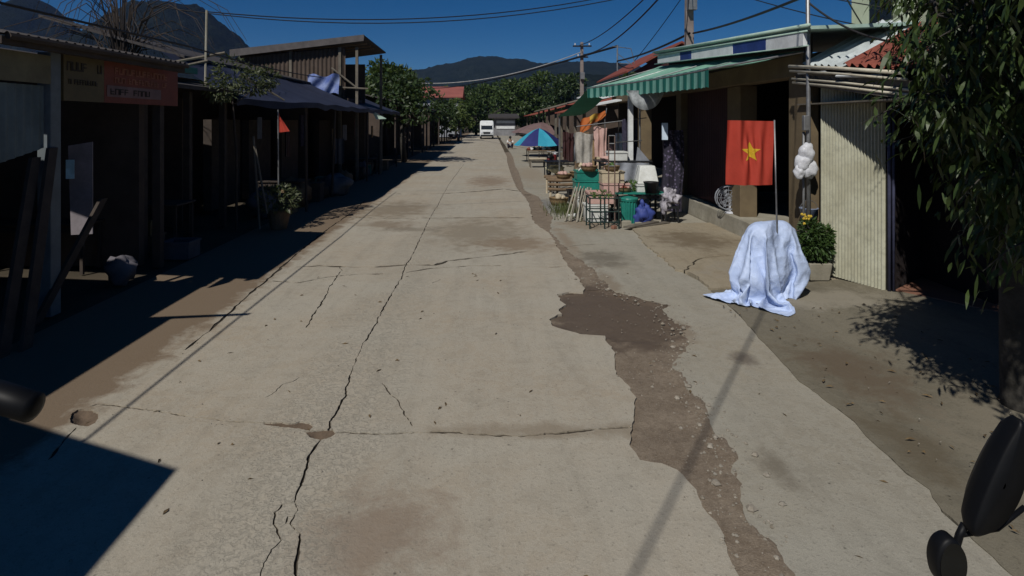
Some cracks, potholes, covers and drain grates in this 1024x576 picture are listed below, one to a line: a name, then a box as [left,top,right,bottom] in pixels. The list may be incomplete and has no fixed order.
crack [260,193,623,576]
pothole [307,430,335,441]
crack [104,405,240,423]
pothole [70,411,98,426]
